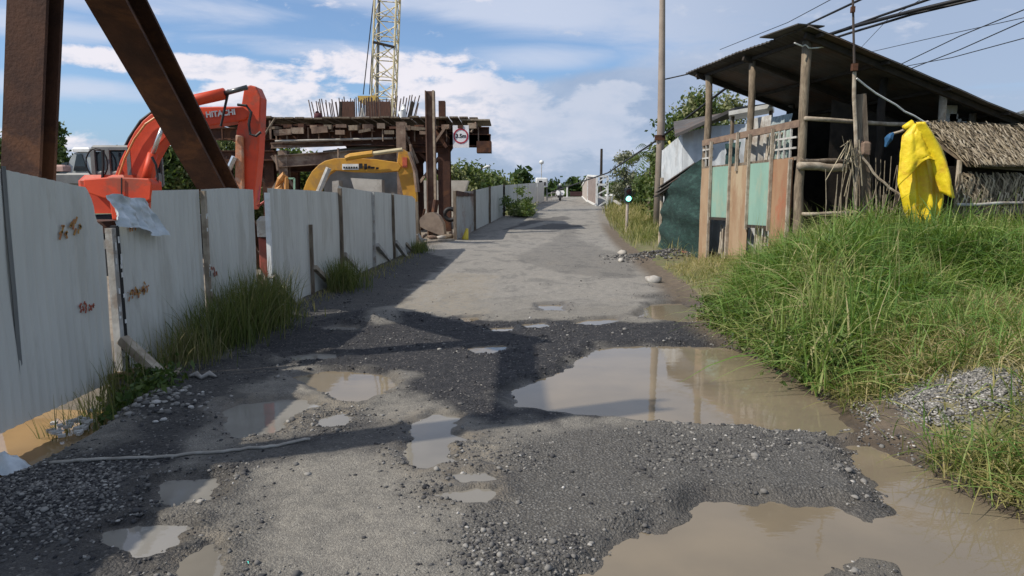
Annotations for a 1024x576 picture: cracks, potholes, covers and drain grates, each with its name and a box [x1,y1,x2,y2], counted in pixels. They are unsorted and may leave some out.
pothole [410,481,519,514]
pothole [196,391,340,442]
pothole [625,299,709,322]
pothole [116,461,252,508]
pothole [549,426,1024,576]
pothole [494,339,884,437]
pothole [378,405,491,478]
pothole [280,363,412,404]
pothole [530,301,575,311]
pothole [134,528,257,576]
pothole [62,505,219,568]
